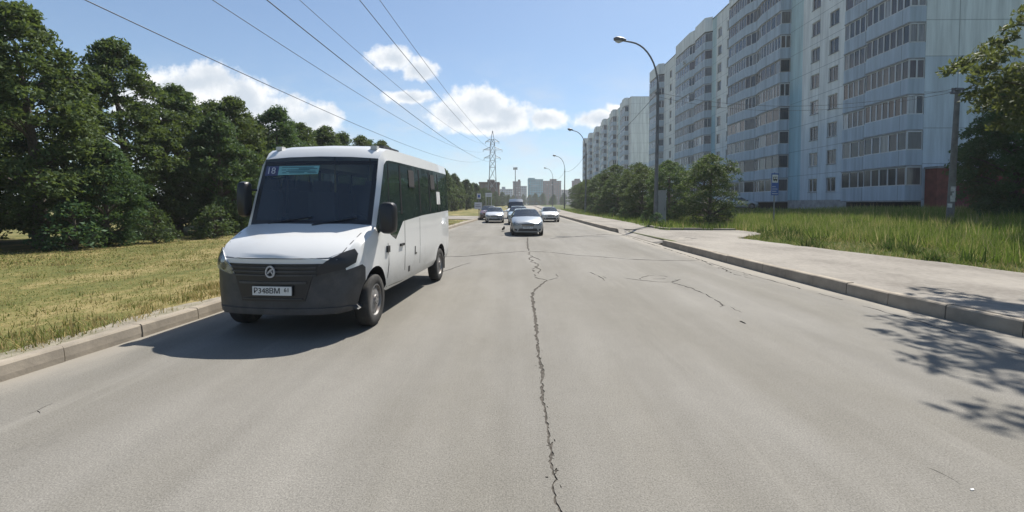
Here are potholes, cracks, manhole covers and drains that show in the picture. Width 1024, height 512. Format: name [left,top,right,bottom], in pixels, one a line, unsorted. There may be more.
crack [443,234,738,512]
